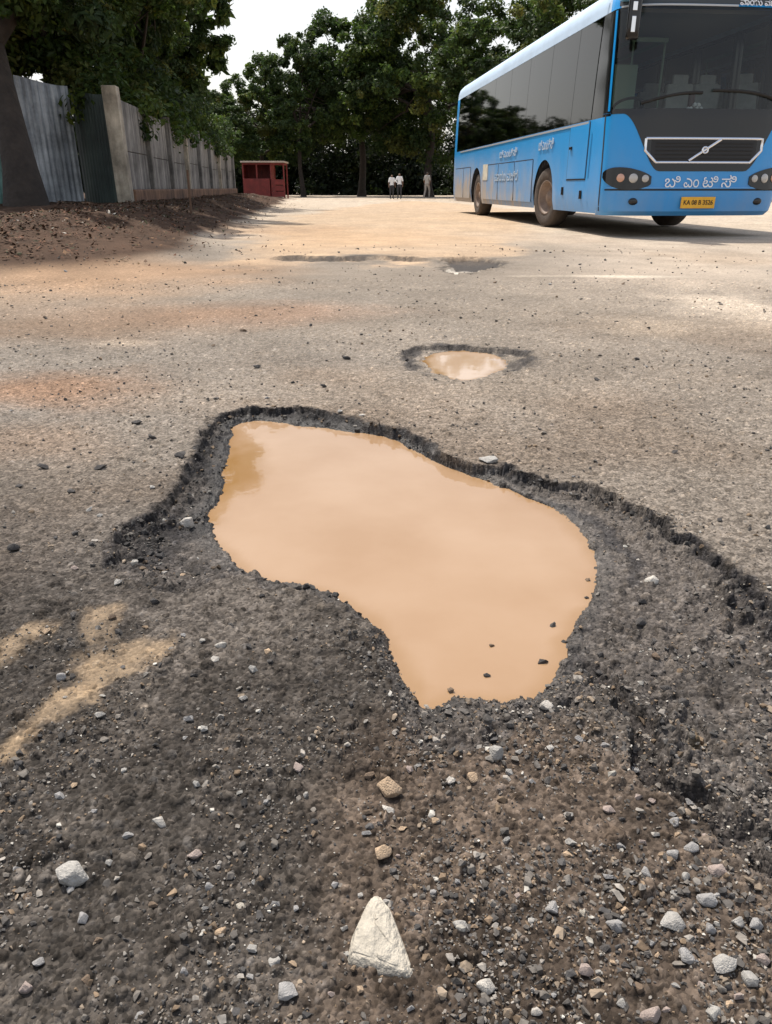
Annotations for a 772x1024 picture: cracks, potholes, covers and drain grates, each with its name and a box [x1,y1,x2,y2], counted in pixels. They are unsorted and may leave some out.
pothole [403,344,533,383]
pothole [432,255,518,274]
pothole [102,405,772,867]
